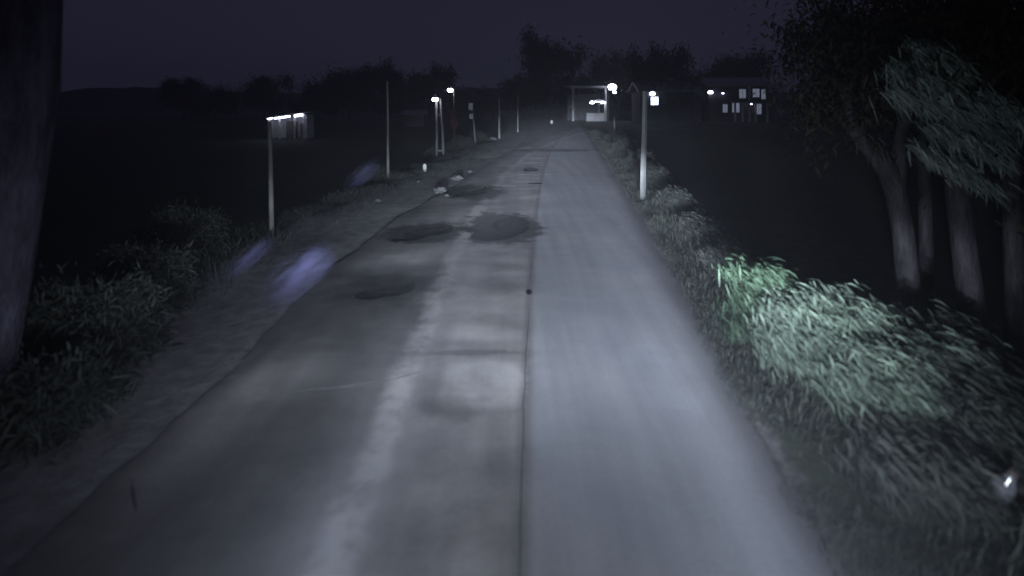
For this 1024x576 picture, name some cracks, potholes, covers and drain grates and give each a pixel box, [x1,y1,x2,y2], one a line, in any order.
pothole [391,224,454,242]
pothole [354,281,416,300]
pothole [471,216,531,241]
pothole [451,186,493,197]
crack [292,370,425,393]
